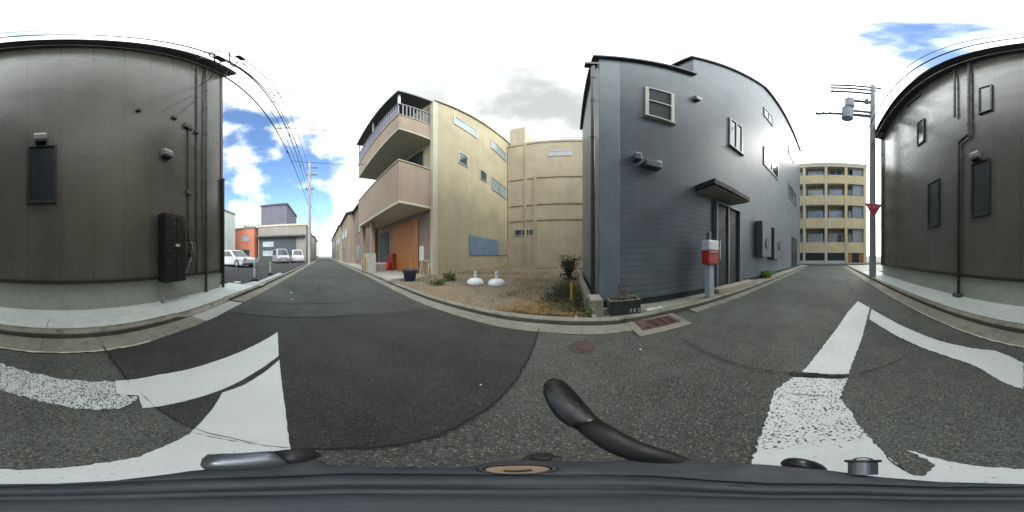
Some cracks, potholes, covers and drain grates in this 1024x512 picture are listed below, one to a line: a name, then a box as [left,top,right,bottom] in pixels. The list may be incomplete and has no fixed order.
drain grate [626,313,692,337]
manhole cover [576,342,595,351]
